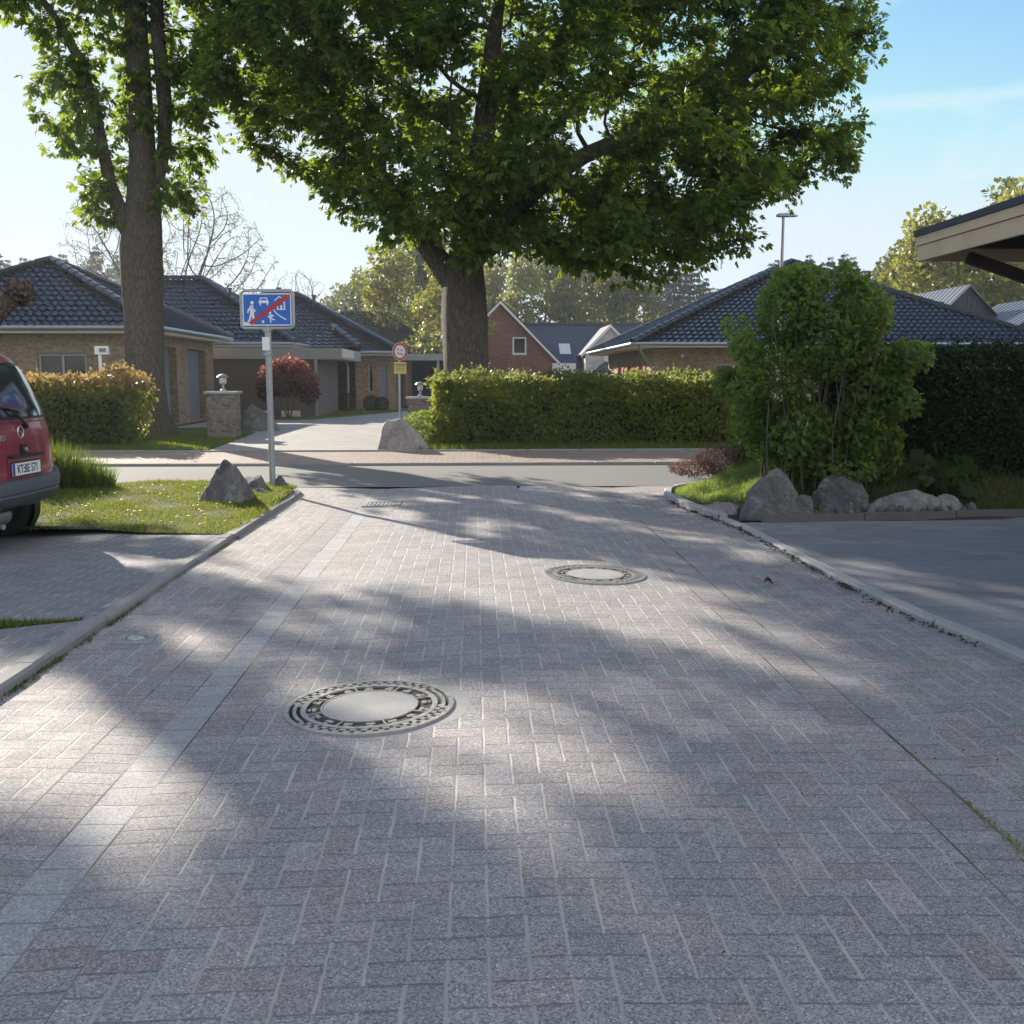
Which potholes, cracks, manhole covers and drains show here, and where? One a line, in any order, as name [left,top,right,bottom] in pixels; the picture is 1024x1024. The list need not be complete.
manhole cover [278,680,470,738]
manhole cover [540,564,657,585]
utility cover [113,633,158,644]
